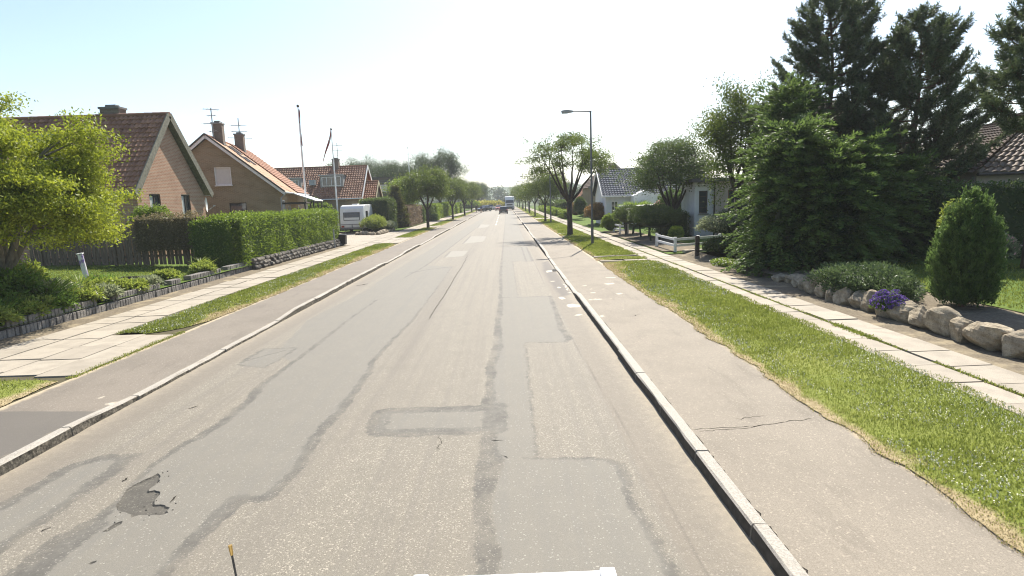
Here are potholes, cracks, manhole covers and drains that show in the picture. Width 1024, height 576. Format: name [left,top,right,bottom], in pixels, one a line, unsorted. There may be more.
crack [604,322,811,574]
pothole [114,471,177,523]
